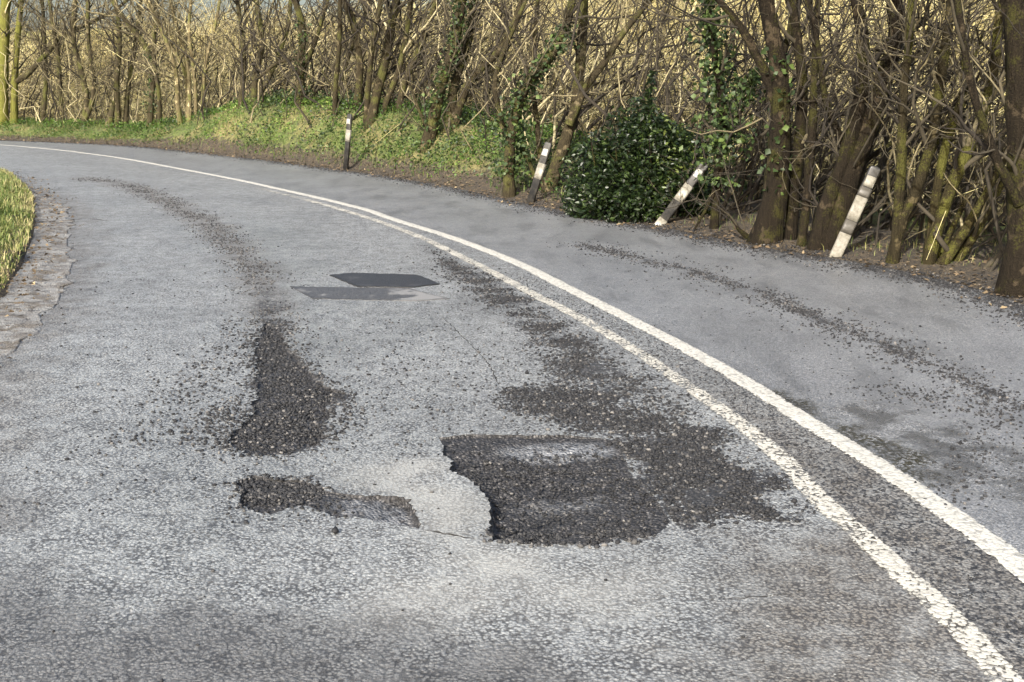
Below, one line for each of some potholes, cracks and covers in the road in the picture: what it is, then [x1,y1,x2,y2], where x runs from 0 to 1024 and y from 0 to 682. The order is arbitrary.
pothole [237,475,421,529]
pothole [439,434,670,545]
crack [444,319,498,383]
crack [423,529,476,539]
